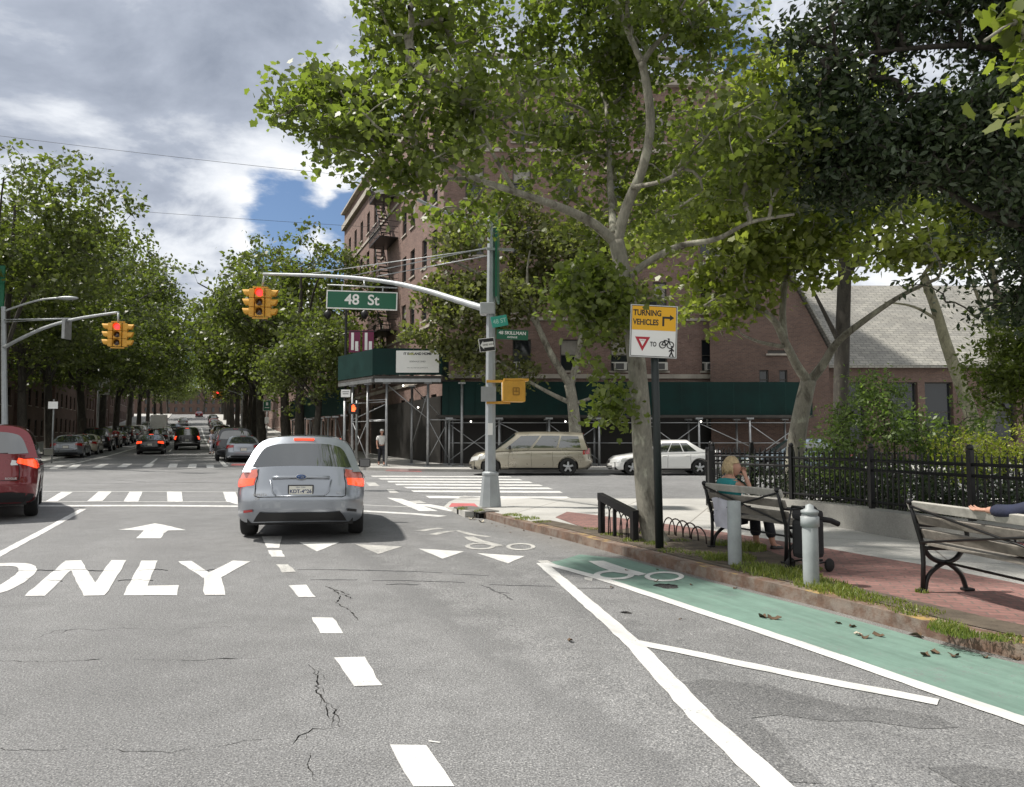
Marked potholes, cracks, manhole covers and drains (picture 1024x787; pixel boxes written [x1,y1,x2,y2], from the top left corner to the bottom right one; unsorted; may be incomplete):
crack [326,586,358,620]
crack [218,664,341,776]
crack [1,745,195,753]
